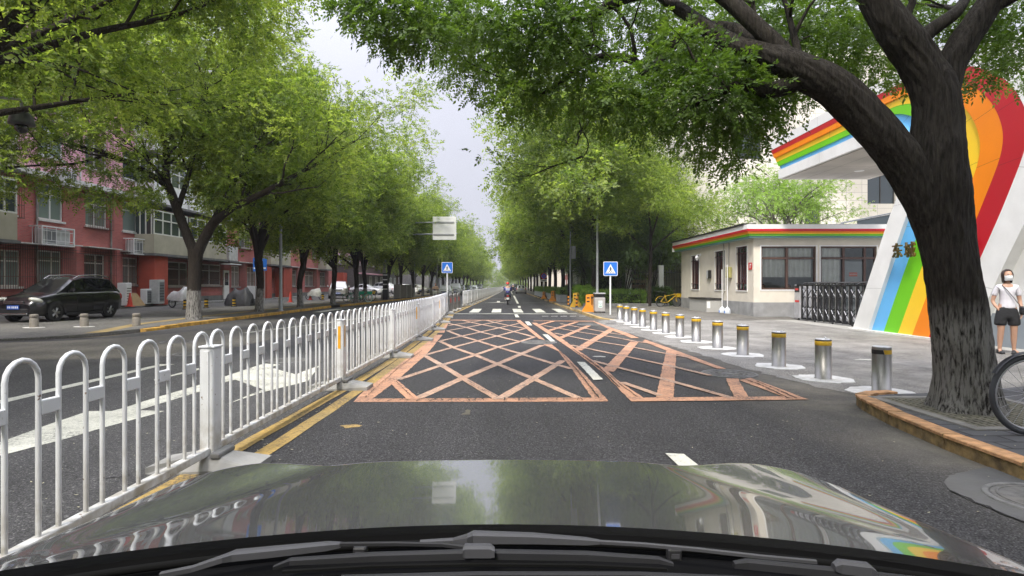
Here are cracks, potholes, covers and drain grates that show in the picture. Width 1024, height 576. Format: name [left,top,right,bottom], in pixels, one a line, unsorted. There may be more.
manhole cover [701,369,759,378]
manhole cover [981,482,1024,510]
